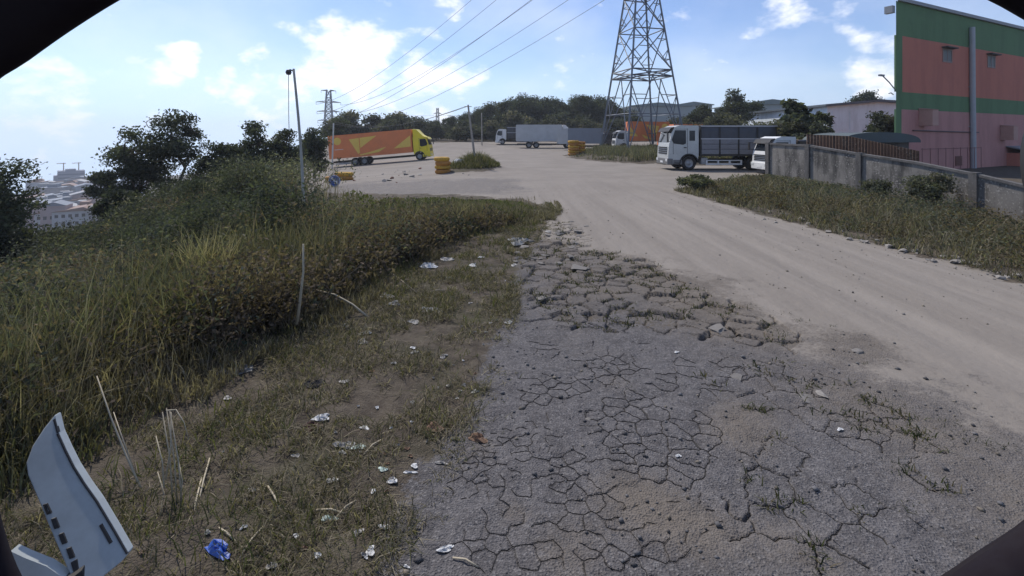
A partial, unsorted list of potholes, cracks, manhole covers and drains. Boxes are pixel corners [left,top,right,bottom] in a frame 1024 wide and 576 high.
crack [446,412,723,575]
crack [524,251,799,343]
crack [517,341,747,490]
crack [701,360,955,575]
